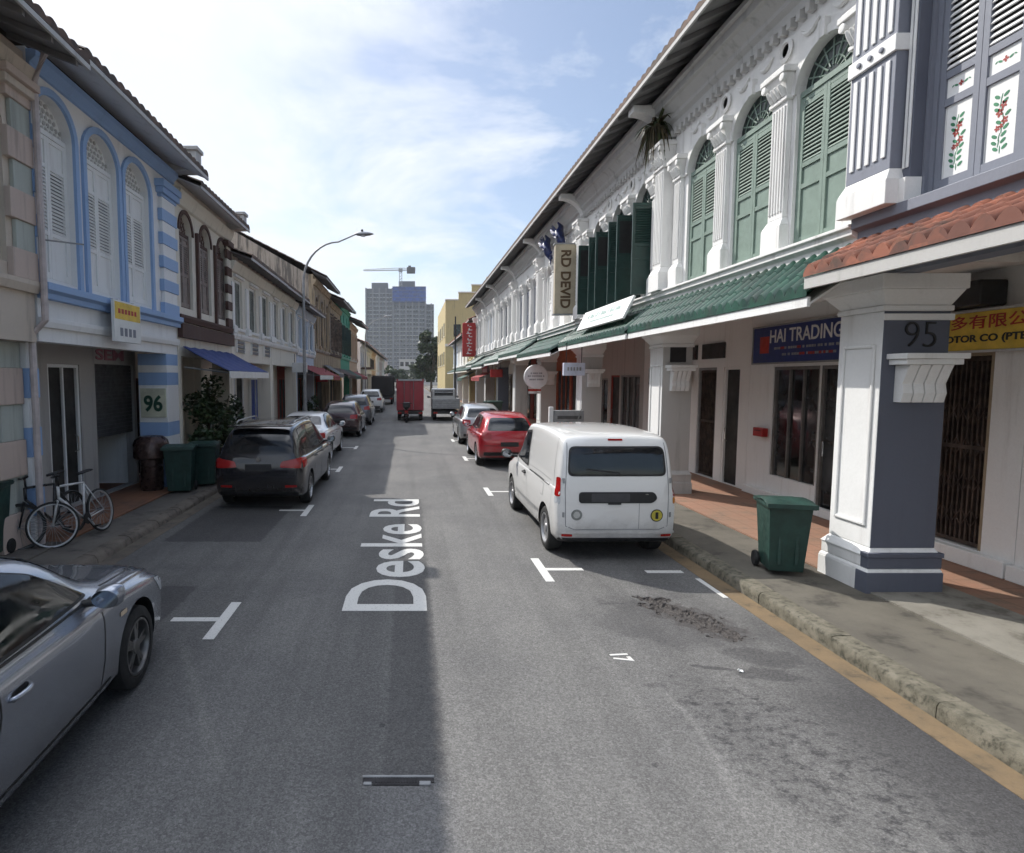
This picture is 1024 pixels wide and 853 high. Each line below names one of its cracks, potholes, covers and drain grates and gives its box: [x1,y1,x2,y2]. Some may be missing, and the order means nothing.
pothole [632,595,755,642]
